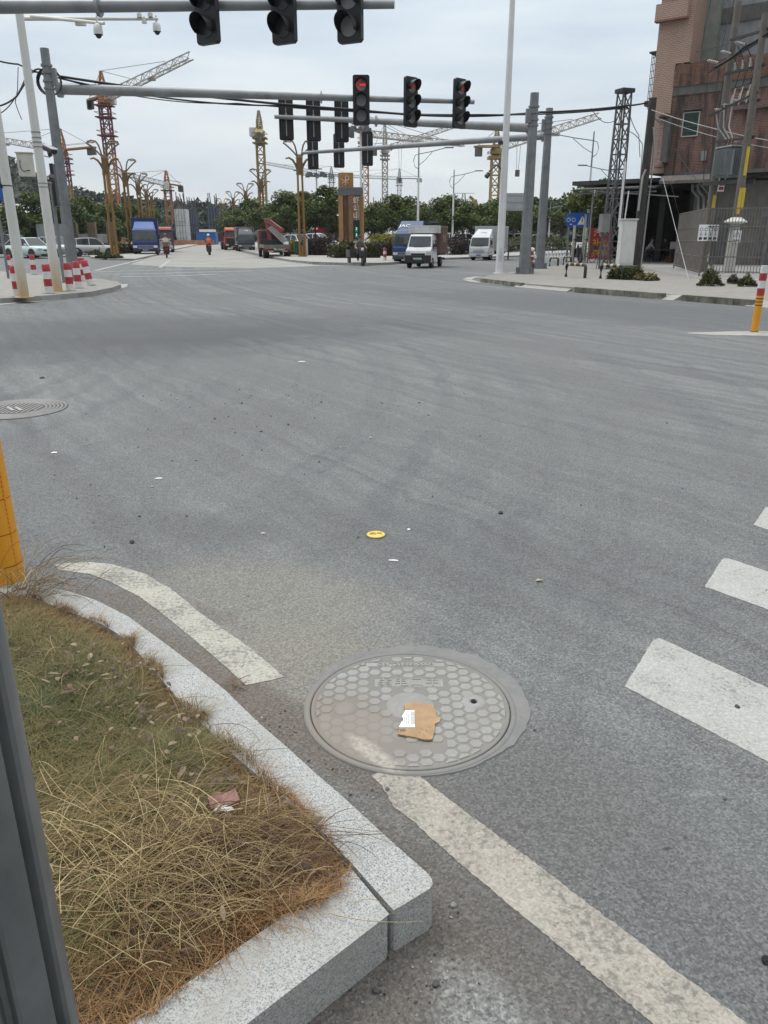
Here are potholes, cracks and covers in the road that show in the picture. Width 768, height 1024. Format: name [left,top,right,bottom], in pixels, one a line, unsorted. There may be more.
manhole cover [0,399,68,420]
manhole cover [303,645,531,777]
